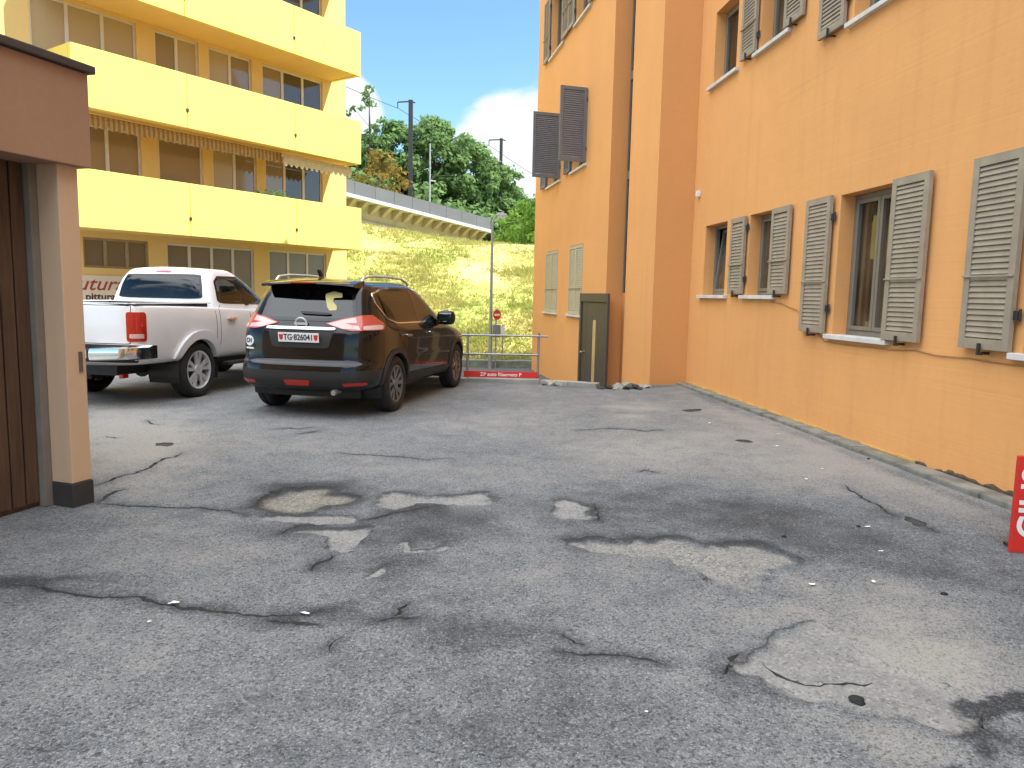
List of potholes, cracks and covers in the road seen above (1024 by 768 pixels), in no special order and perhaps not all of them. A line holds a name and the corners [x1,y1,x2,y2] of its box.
crack [845,485,934,531]
pothole [558,535,806,592]
crack [98,452,182,502]
pothole [549,498,598,520]
pothole [372,491,497,510]
crack [7,583,342,652]
pothole [246,486,361,515]
crack [561,634,664,665]
pothole [289,523,380,553]
